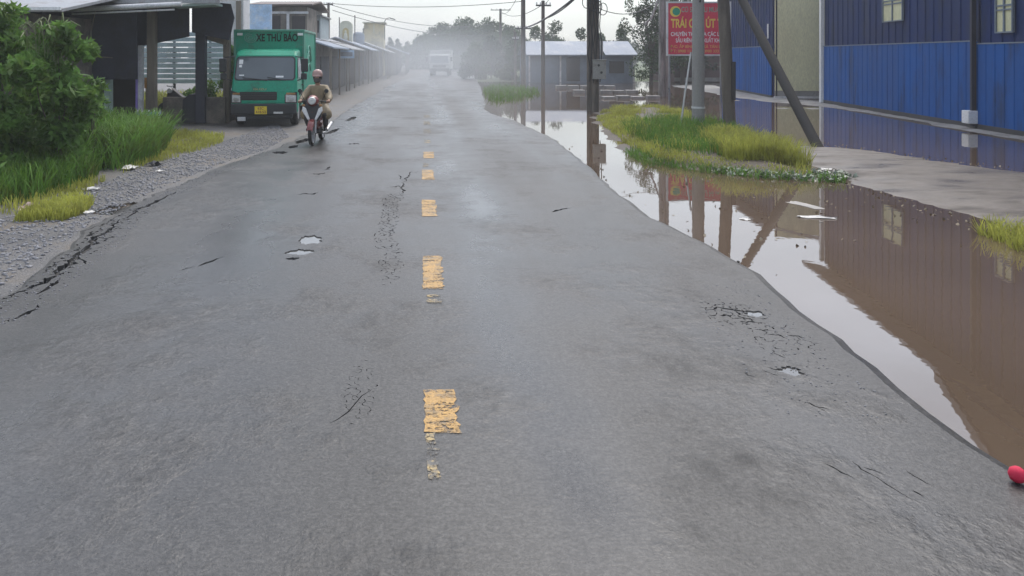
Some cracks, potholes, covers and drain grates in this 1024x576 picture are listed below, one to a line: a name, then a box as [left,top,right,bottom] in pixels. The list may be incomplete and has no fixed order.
crack [331,360,378,424]
crack [0,192,176,322]
crack [825,461,932,501]
pothole [776,366,804,376]
pothole [299,235,322,245]
crack [374,172,411,285]
